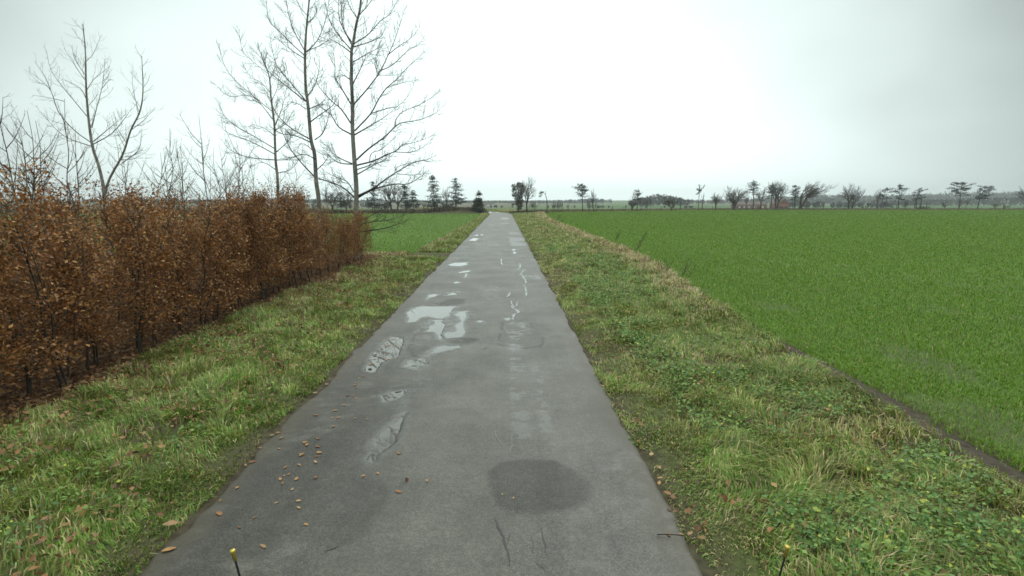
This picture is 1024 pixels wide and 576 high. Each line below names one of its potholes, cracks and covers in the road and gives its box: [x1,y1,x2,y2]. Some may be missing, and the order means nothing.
crack [495,520,510,566]
crack [501,259,528,320]
